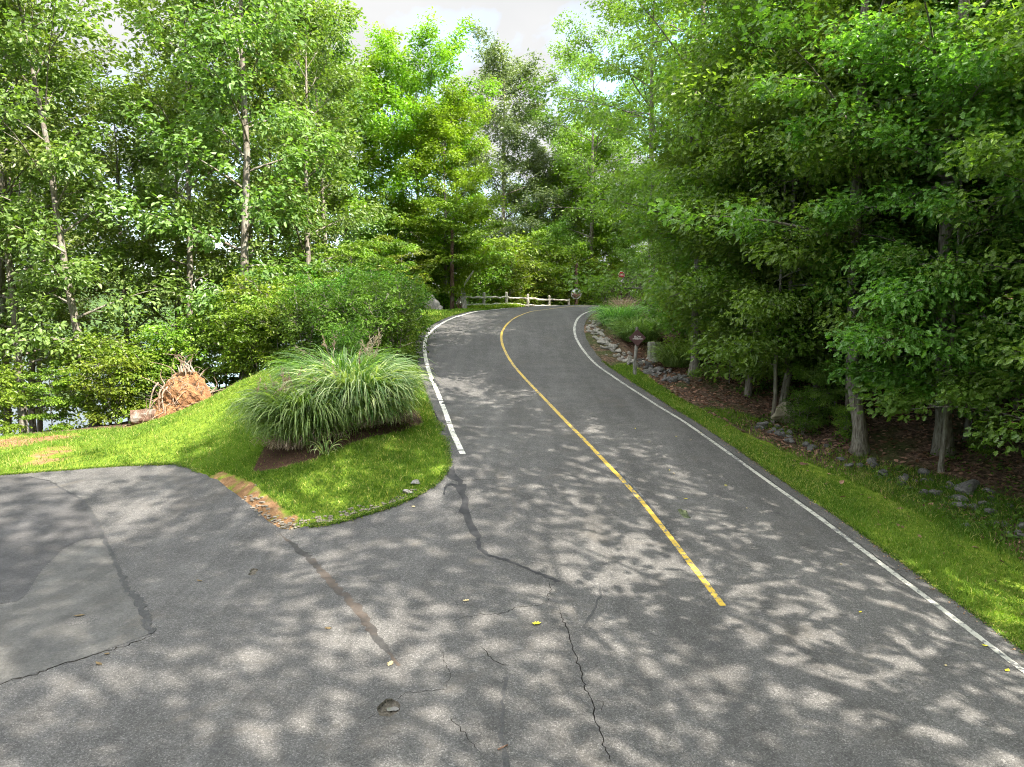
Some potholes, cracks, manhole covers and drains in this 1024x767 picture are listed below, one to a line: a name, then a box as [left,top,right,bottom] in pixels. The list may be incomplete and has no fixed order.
pothole [377,698,400,717]
crack [451,580,610,767]
